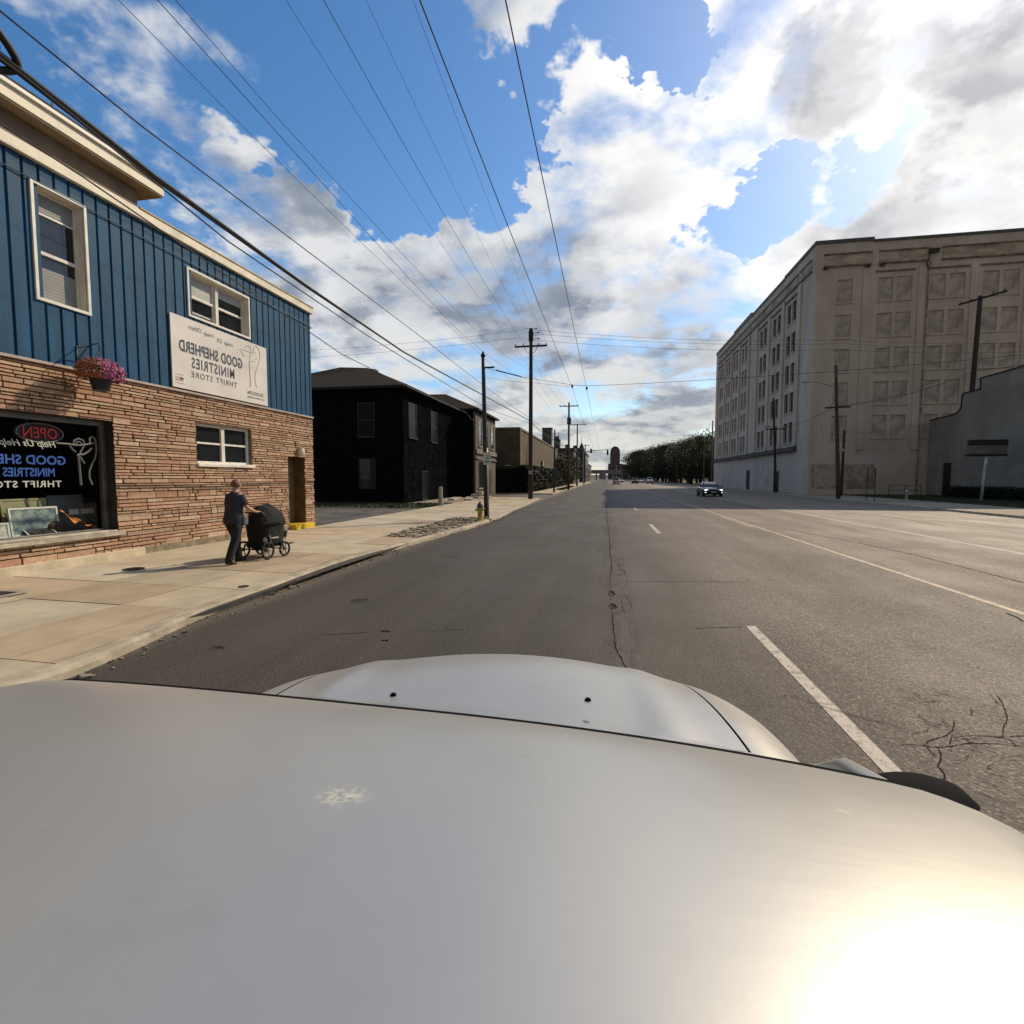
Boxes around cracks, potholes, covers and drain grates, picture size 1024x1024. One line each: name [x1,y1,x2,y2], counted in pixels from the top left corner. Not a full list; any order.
crack [885,688,1024,809]
pothole [604,589,617,599]
pothole [604,601,621,612]
